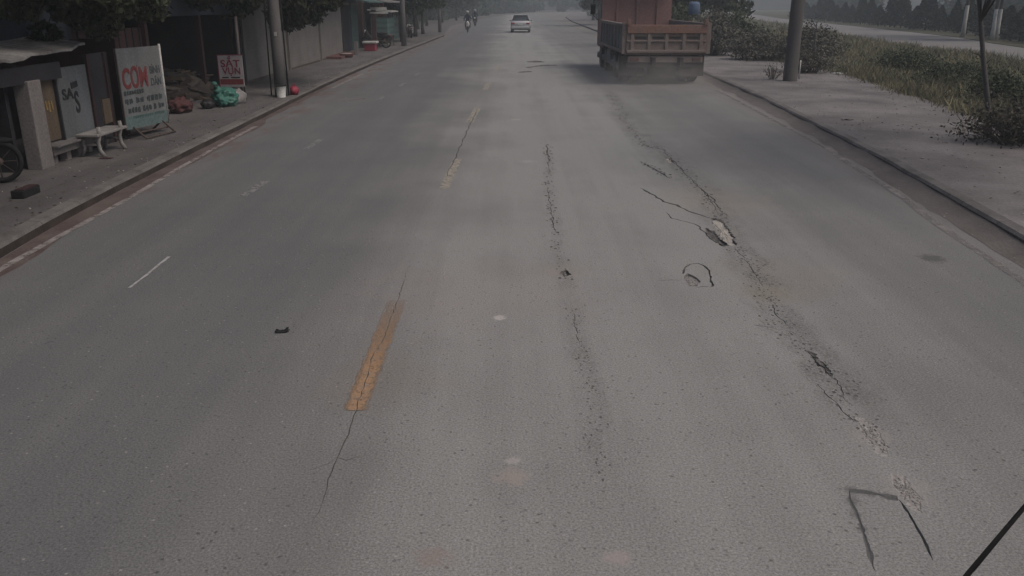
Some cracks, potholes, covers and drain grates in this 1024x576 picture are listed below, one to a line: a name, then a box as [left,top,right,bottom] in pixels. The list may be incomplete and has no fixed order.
crack [682,263,714,288]
crack [607,92,728,247]
pothole [705,228,728,247]
pothole [684,273,701,286]
crack [309,273,406,532]
crack [726,247,879,431]
pothole [711,218,738,246]
